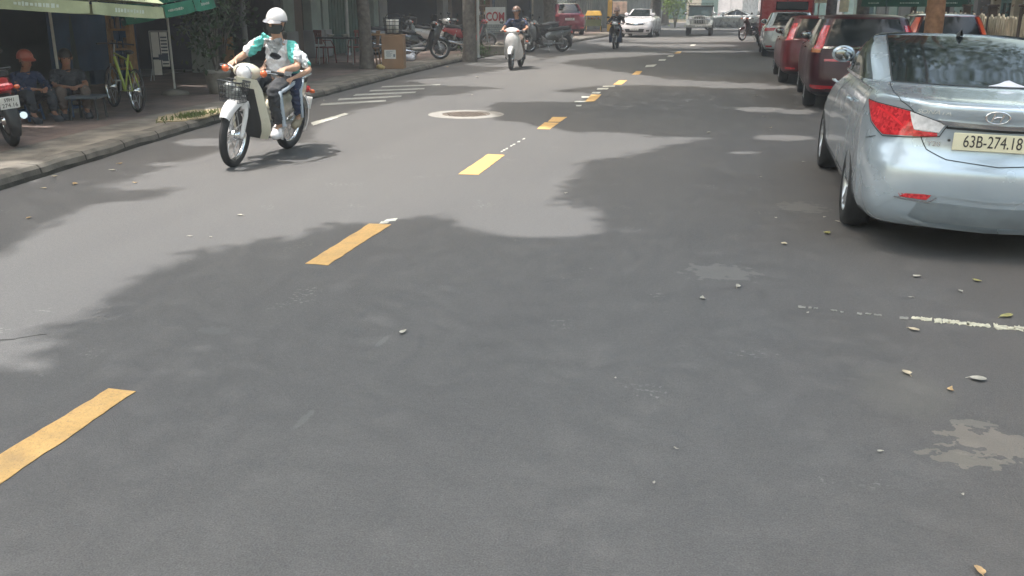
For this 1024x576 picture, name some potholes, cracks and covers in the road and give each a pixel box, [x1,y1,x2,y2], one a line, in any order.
manhole cover [428,110,504,119]
